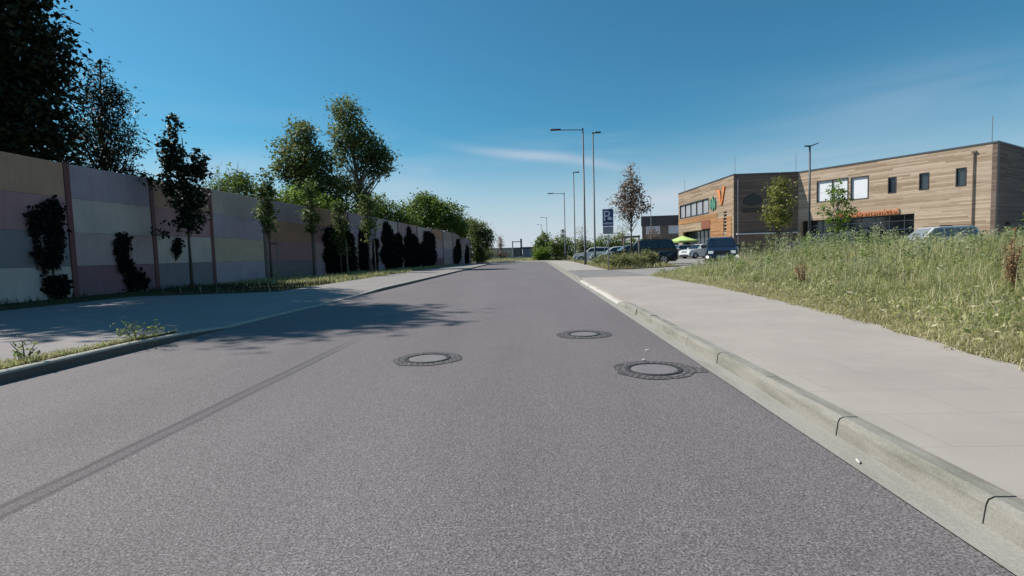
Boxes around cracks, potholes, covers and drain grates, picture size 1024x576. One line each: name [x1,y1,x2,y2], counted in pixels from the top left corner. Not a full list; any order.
manhole cover [557,330,612,339]
manhole cover [393,352,462,366]
manhole cover [614,361,708,380]
